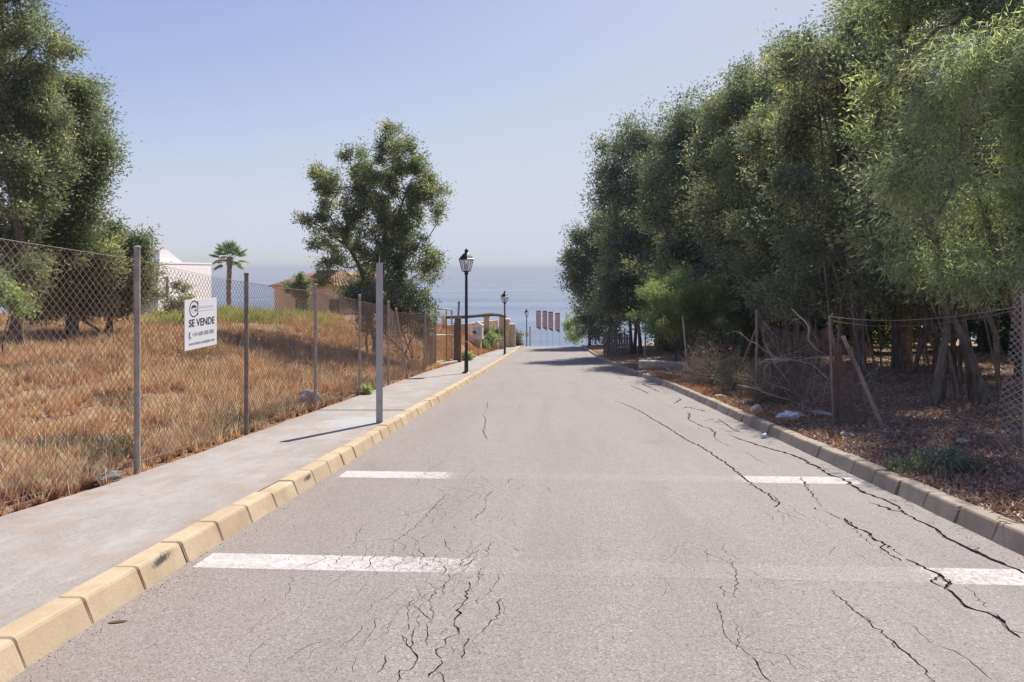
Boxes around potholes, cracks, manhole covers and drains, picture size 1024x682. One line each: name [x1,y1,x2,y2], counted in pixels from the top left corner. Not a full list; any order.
crack [620,384,1024,682]
crack [241,461,549,682]
